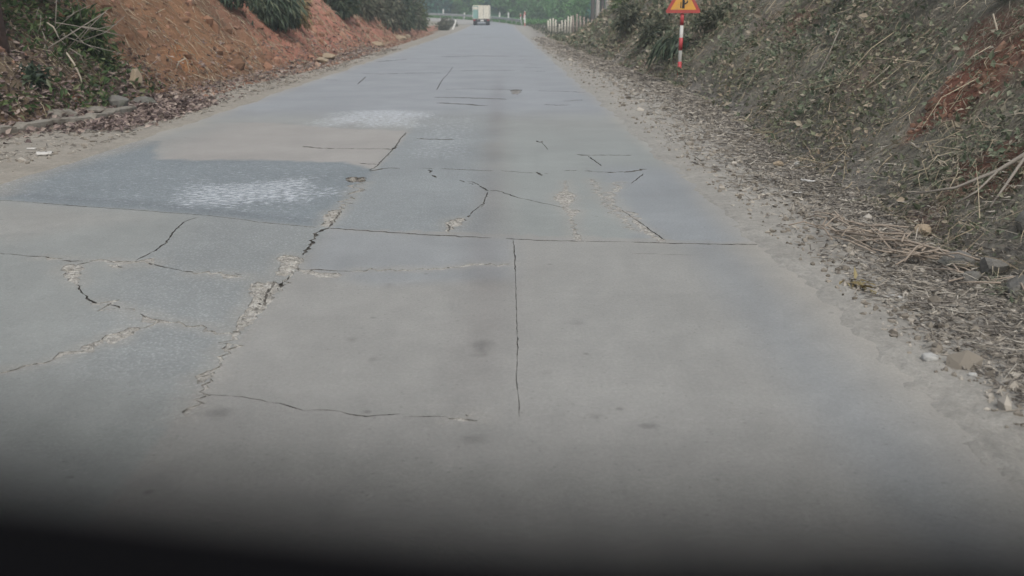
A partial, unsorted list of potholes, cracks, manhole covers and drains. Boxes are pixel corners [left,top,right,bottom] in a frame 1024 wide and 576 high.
crack [0,217,242,374]
crack [303,133,643,241]
crack [209,394,477,421]
crack [437,56,499,106]
